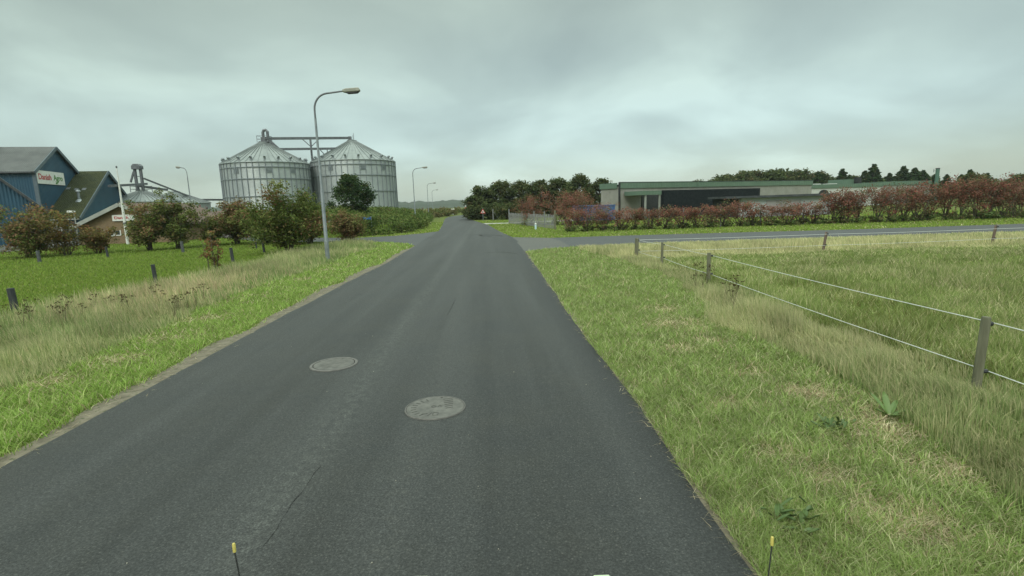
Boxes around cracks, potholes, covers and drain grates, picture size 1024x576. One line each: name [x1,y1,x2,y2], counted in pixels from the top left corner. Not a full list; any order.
manhole cover [405,396,466,420]
manhole cover [309,357,358,372]
